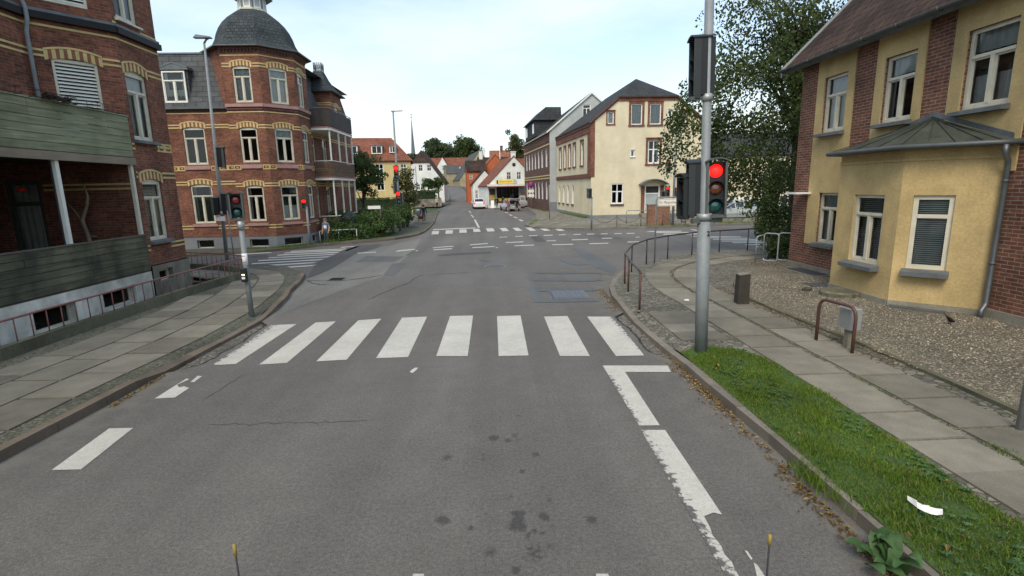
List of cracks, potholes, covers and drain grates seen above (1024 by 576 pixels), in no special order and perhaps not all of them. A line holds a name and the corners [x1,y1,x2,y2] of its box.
manhole cover [548,290,590,299]
